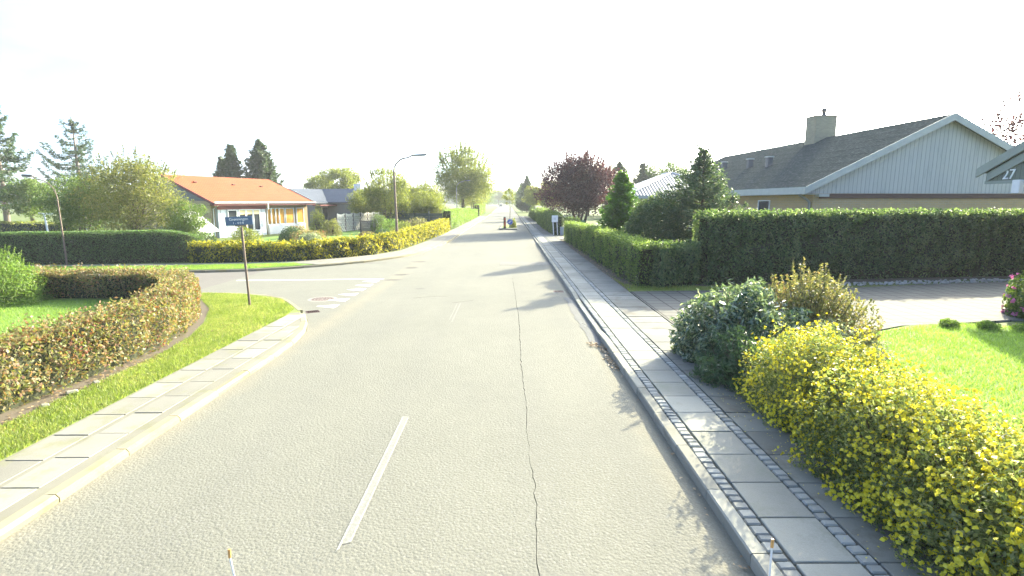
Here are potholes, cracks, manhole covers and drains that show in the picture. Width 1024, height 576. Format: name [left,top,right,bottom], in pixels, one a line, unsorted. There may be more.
crack [512,276,540,576]
